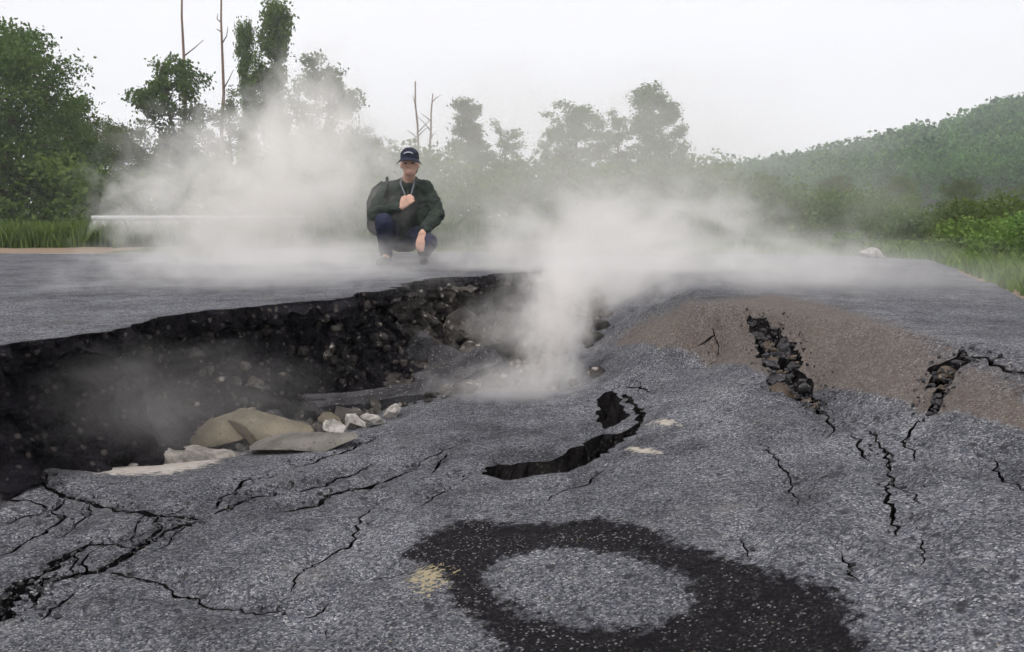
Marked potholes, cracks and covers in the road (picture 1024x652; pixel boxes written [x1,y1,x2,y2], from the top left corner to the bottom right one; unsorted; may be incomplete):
crack [841,553,860,582]
crack [215,386,651,637]
crack [0,485,281,622]
crack [746,315,1024,536]
